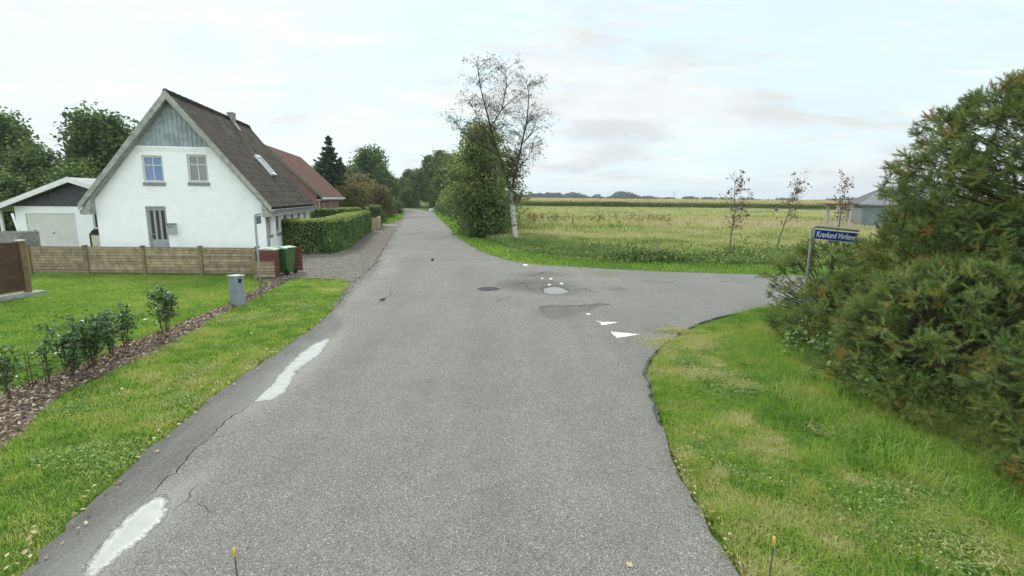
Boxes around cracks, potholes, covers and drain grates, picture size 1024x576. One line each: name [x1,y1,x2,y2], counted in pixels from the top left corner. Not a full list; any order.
crack [139,405,249,513]
